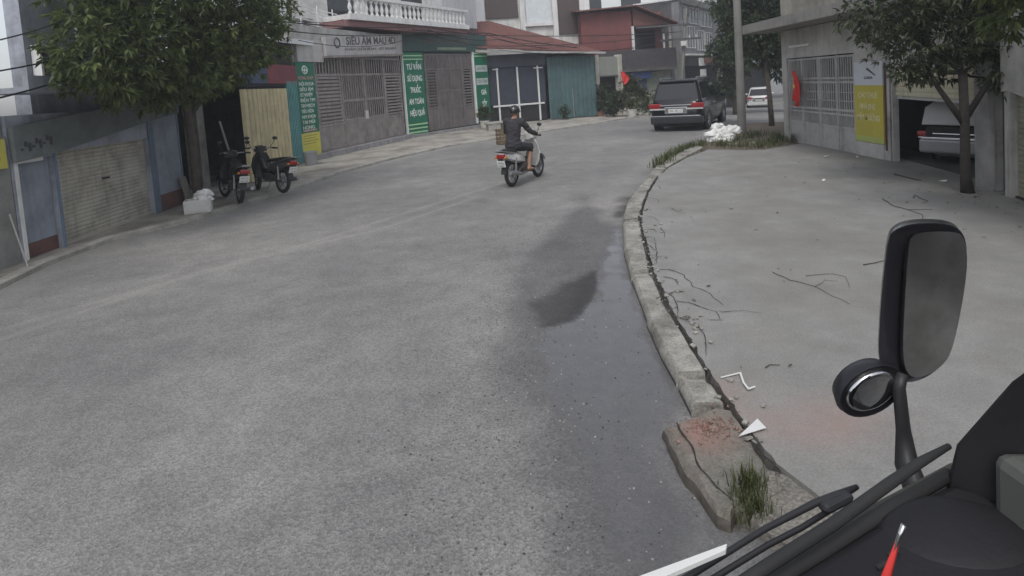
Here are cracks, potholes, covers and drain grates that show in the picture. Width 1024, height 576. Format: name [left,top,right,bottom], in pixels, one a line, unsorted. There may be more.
crack [635,176,781,474]
